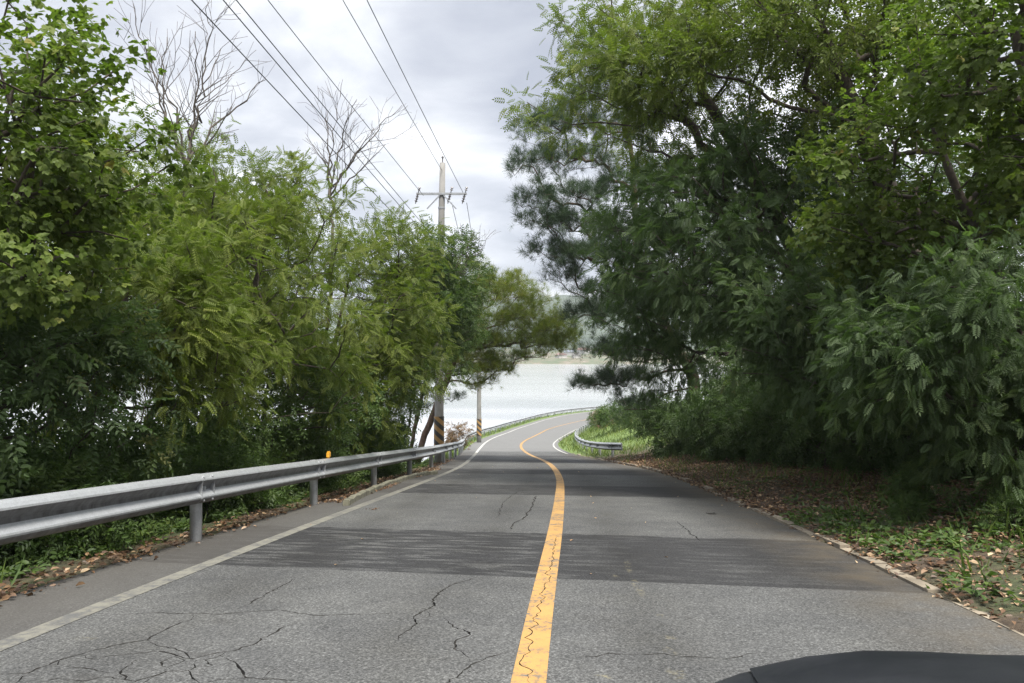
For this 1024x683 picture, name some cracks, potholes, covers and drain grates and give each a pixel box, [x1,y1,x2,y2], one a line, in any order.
crack [499,494,536,529]
crack [0,542,555,683]
